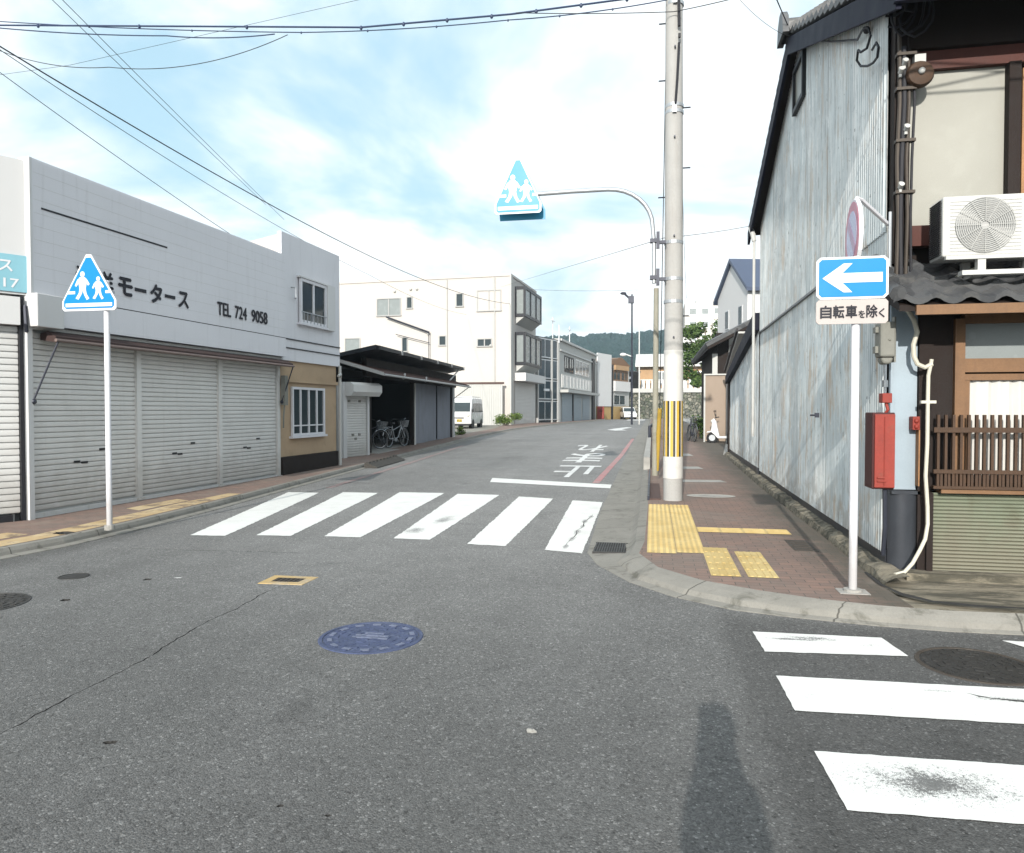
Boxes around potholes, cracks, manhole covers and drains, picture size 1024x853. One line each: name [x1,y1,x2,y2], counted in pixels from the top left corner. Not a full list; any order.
manhole cover [914,647,1024,686]
drain grate [592,542,628,553]
manhole cover [0,593,32,610]
crack [0,591,268,734]
manhole cover [318,622,423,654]
